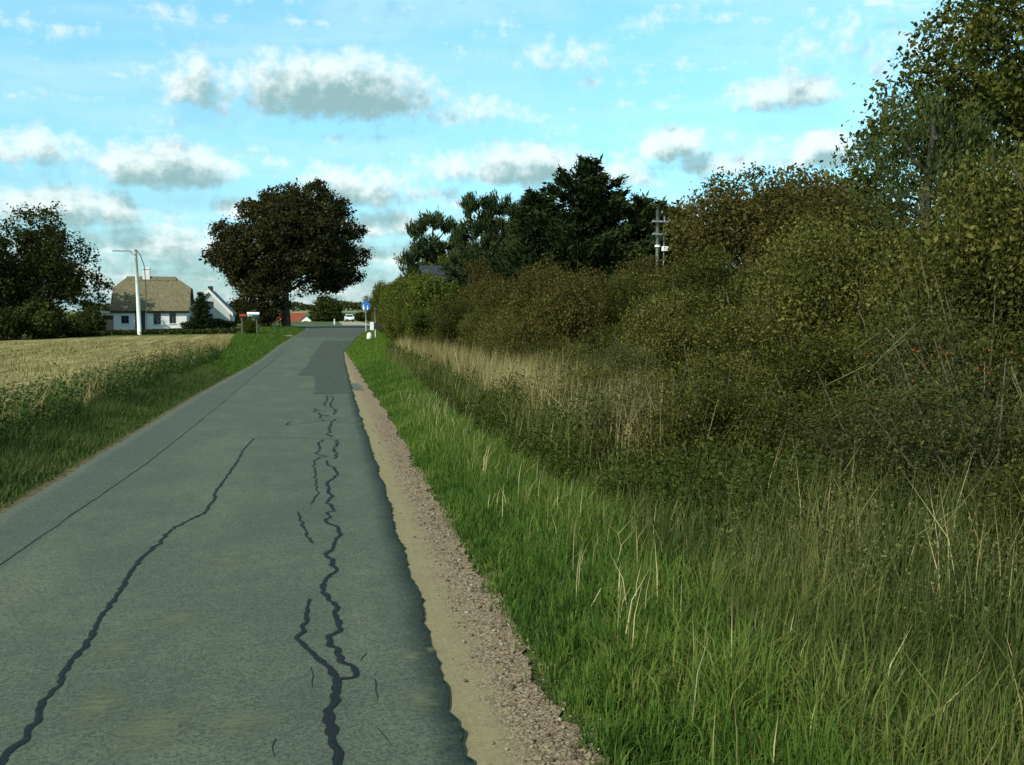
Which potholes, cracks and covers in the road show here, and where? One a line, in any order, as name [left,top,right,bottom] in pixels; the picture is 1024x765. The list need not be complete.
crack [294,396,378,765]
crack [0,439,254,765]
